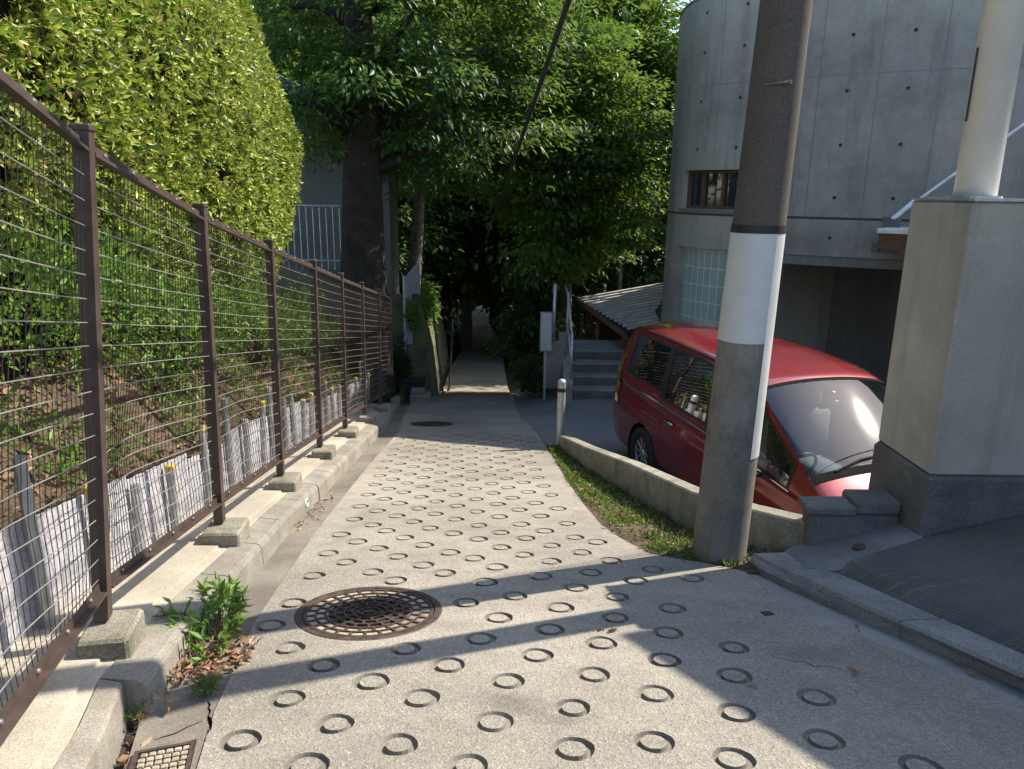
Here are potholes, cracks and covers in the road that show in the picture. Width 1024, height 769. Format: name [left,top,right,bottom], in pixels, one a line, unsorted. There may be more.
drain grate [128,740,196,769]
manhole cover [294,586,442,641]
